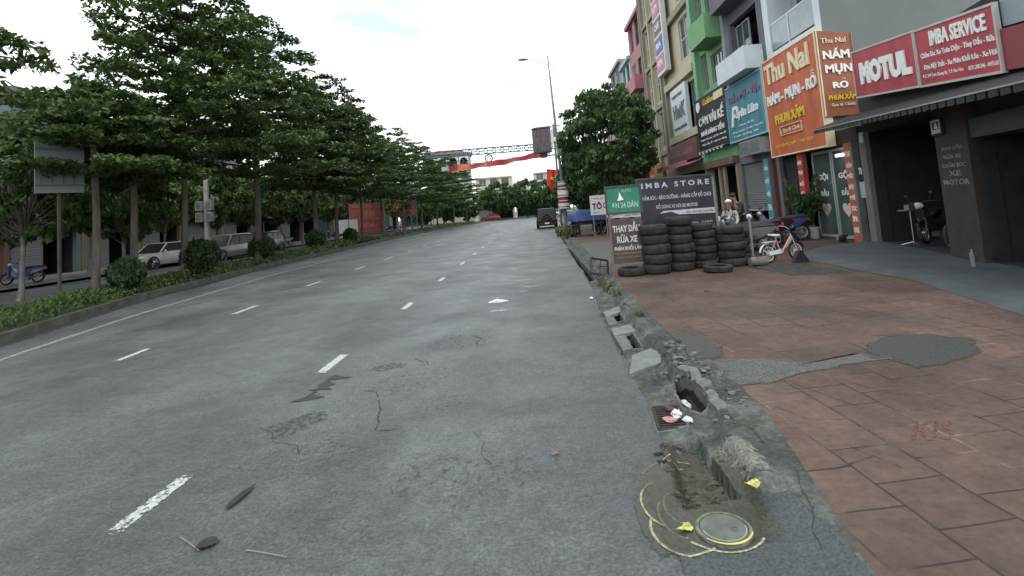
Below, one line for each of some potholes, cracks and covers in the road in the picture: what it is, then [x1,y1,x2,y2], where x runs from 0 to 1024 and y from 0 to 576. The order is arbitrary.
manhole cover [695,512,754,549]
drain grate [651,405,686,431]
pothole [673,376,709,415]
crack [797,474,824,552]
